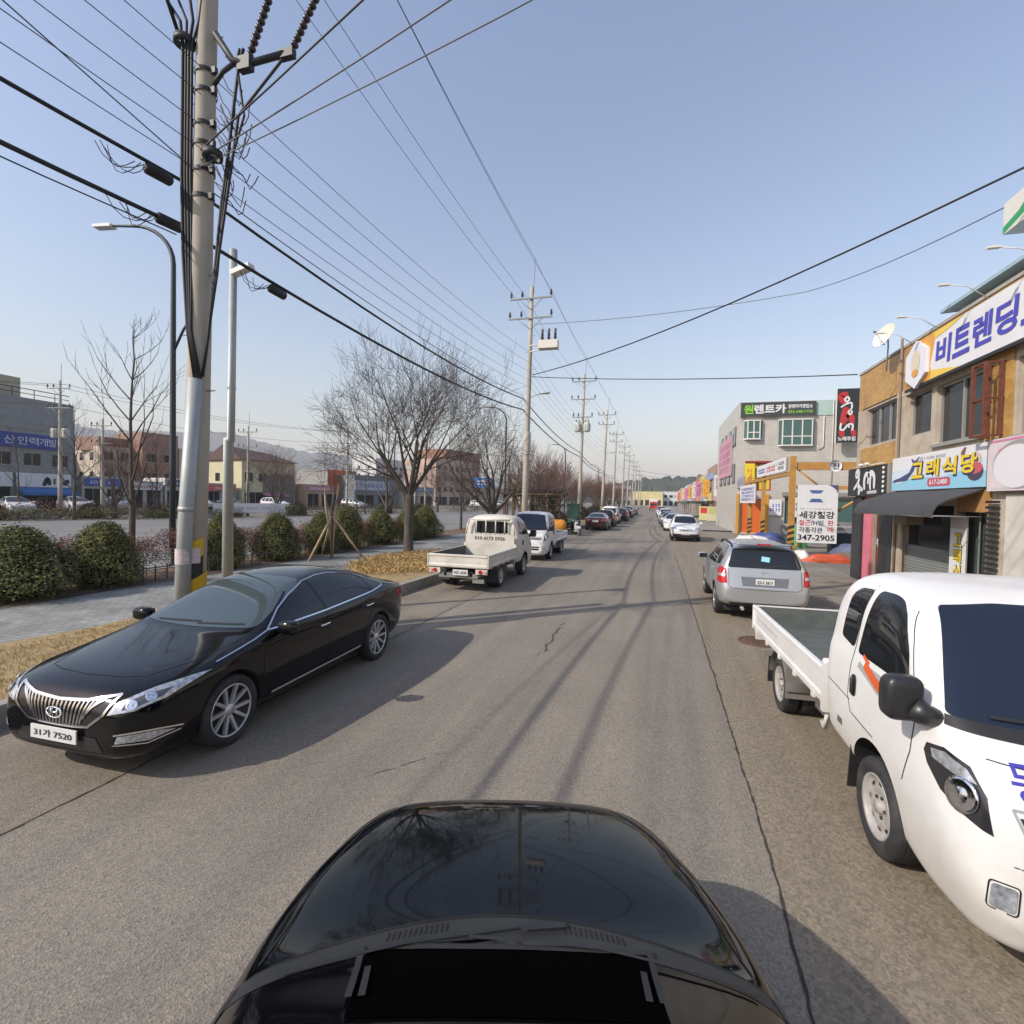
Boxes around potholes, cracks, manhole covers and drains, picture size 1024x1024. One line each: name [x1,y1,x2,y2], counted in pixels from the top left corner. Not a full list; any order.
manhole cover [737,636,771,648]
